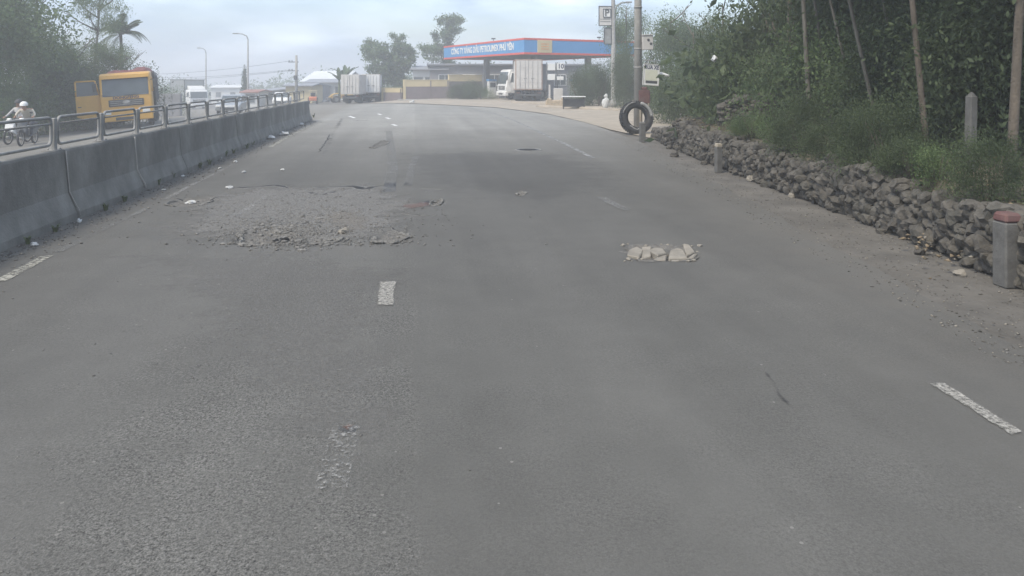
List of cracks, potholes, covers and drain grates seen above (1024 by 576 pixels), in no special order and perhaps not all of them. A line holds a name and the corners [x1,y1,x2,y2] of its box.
pothole [370,231,413,244]
pothole [302,236,344,244]
pothole [237,228,294,245]
pothole [164,198,214,207]
pothole [619,243,703,262]
